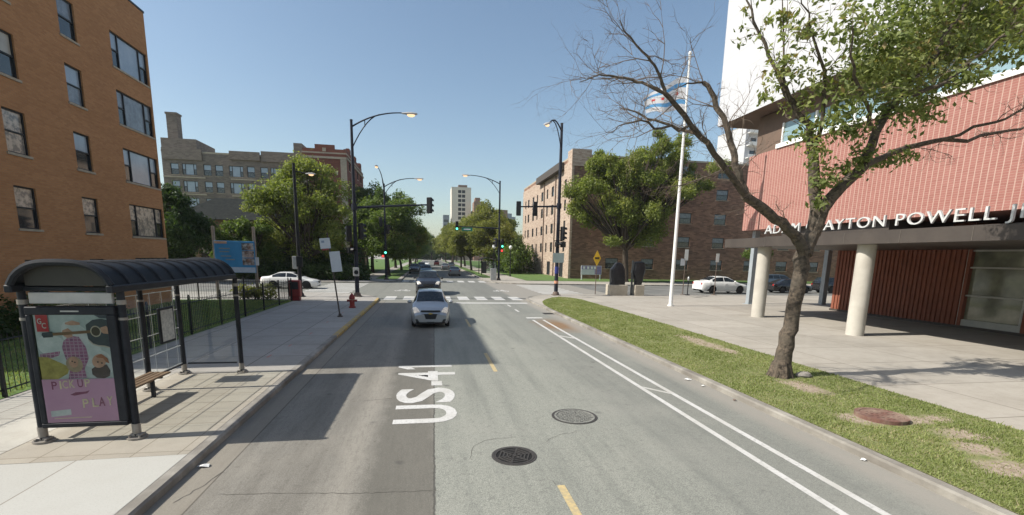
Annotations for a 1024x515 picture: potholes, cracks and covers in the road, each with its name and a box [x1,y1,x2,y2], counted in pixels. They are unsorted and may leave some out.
manhole cover [854,407,911,426]
manhole cover [552,409,598,424]
manhole cover [492,446,537,466]
